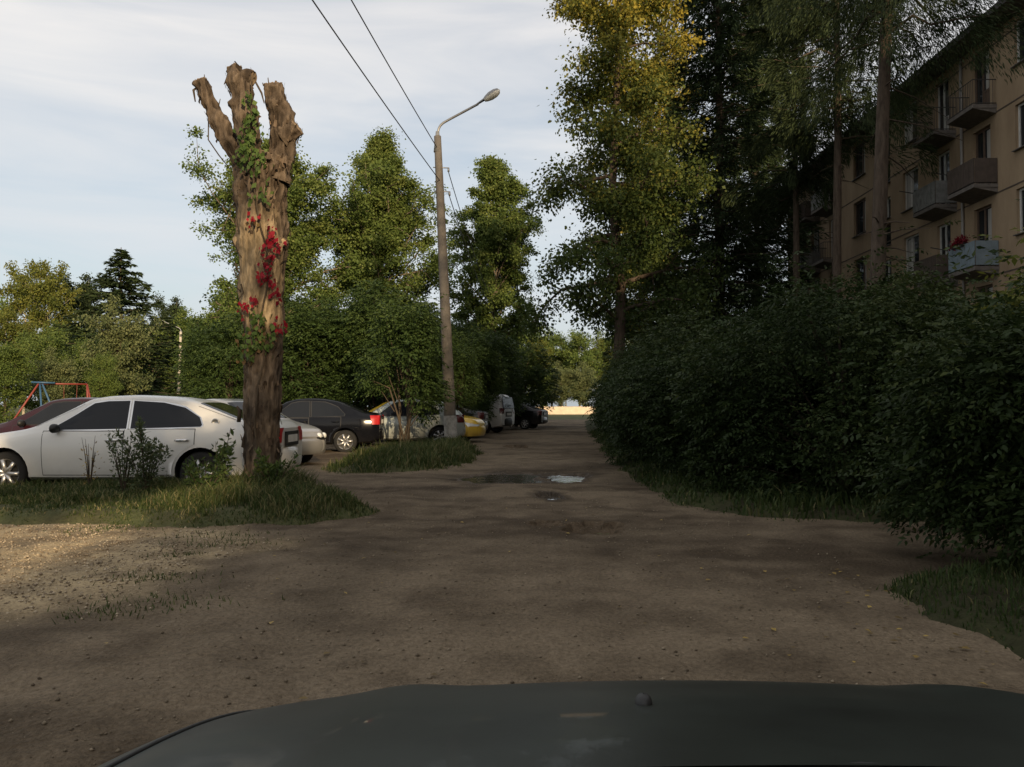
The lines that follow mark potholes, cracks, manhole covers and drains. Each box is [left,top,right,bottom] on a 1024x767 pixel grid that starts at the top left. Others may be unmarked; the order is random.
pothole [456,472,551,485]
pothole [533,491,566,501]
pothole [559,520,625,535]
pothole [539,473,595,483]
